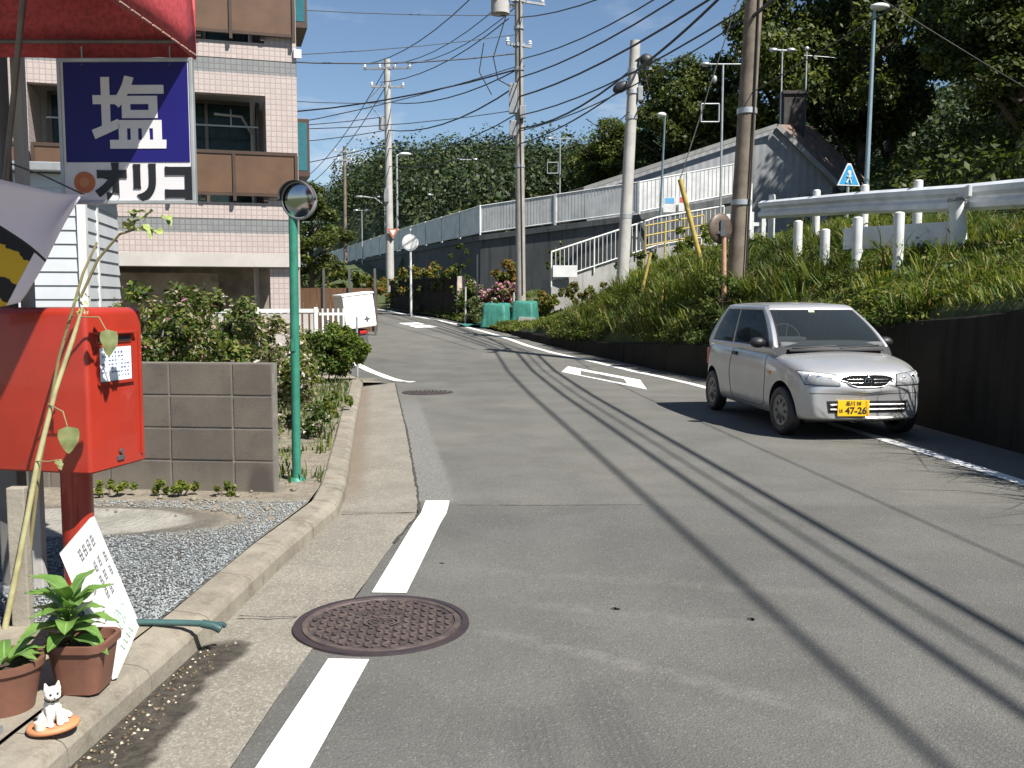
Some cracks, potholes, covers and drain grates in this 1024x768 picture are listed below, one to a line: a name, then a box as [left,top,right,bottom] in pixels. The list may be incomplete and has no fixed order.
manhole cover [292,595,469,657]
